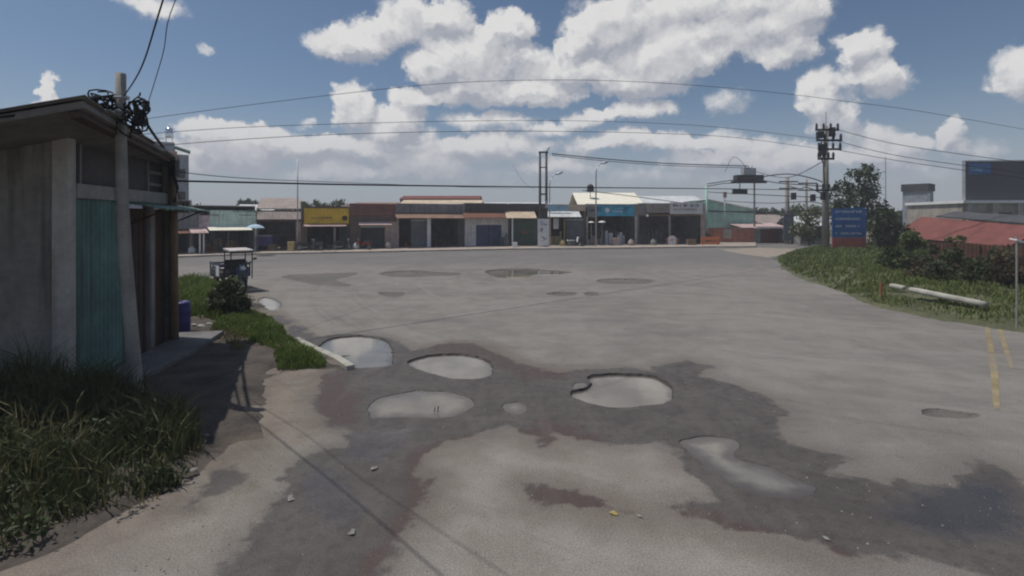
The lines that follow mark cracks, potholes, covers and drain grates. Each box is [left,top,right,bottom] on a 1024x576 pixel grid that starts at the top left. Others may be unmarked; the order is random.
pothole [570,373,674,408]
pothole [379,270,461,278]
pothole [921,408,980,419]
pothole [366,390,475,418]
pothole [679,435,817,498]
pothole [407,353,494,379]
pothole [257,297,282,311]
pothole [501,402,528,415]
pothole [485,268,572,279]
pothole [318,335,394,368]
